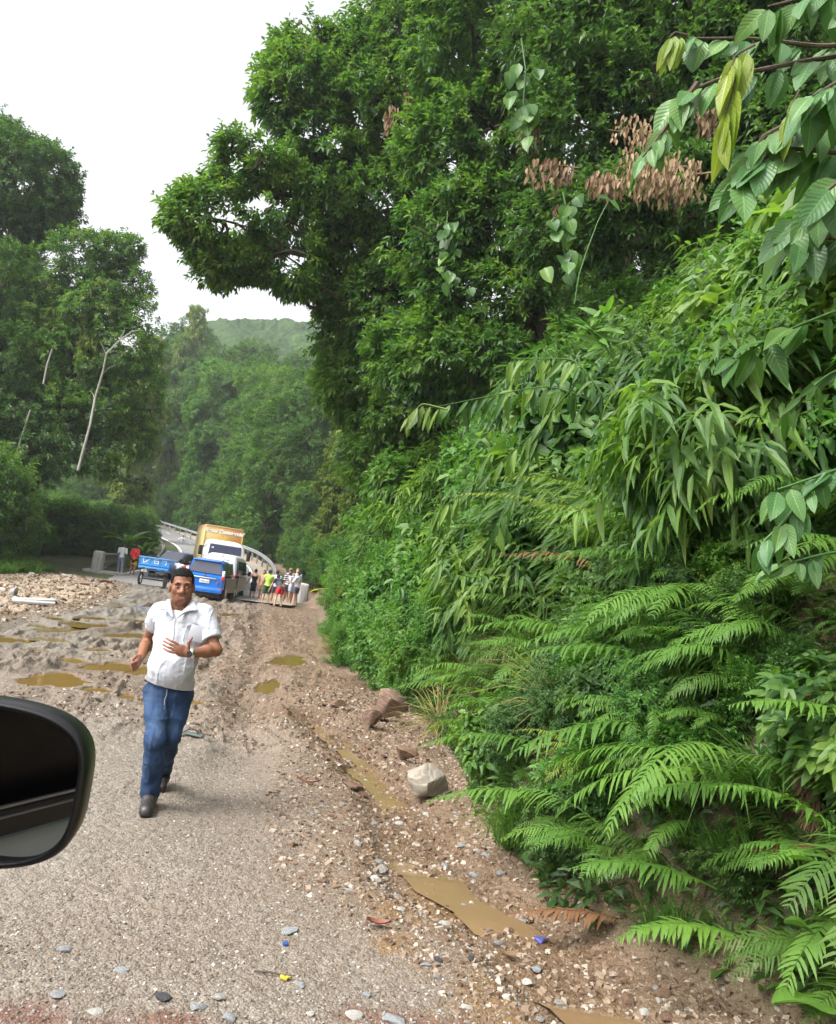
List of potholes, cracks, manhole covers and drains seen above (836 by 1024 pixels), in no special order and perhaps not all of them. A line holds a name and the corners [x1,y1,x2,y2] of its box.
pothole [120,664,147,677]
pothole [6,670,102,689]
pothole [251,677,285,697]
pothole [69,659,141,672]
pothole [260,653,312,668]
pothole [54,620,118,630]
pothole [0,635,42,644]
